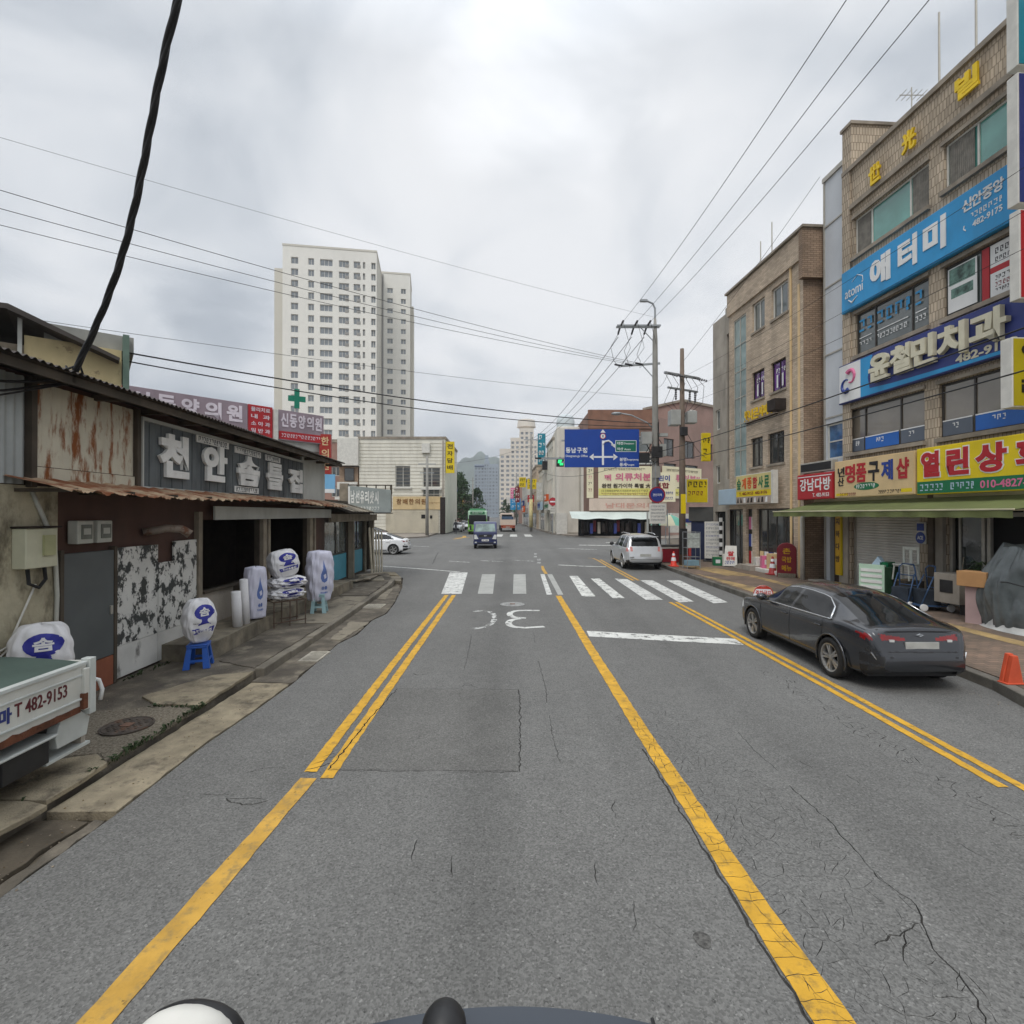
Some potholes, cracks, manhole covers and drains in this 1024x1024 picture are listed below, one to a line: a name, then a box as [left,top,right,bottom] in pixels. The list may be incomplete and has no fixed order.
crack [618,707,999,1024]
manhole cover [98,716,155,736]
